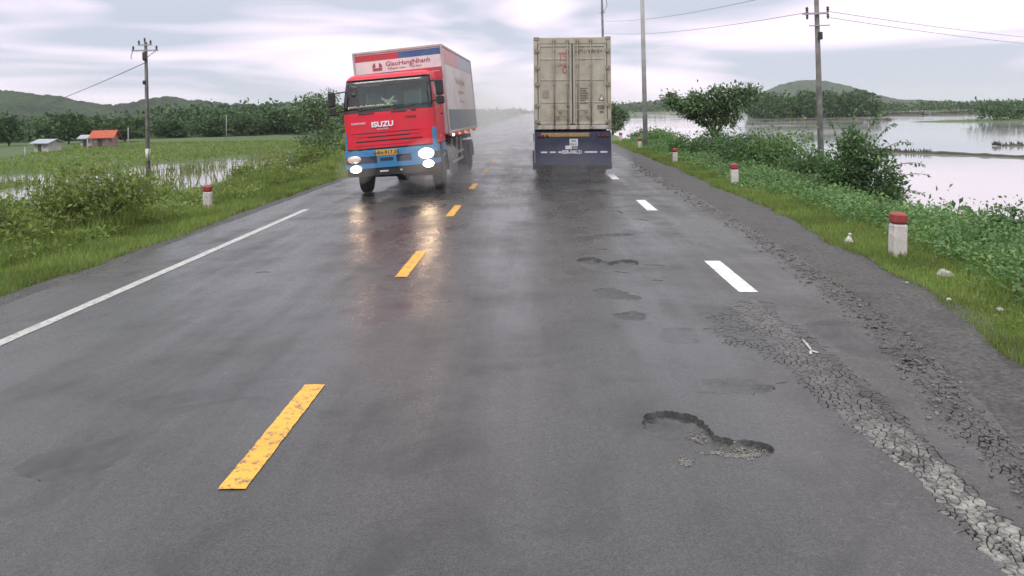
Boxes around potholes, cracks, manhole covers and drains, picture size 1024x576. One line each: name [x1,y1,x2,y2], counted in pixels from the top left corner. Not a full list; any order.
pothole [612,311,646,321]
pothole [641,410,775,469]
pothole [689,376,776,396]
pothole [577,257,639,269]
crack [702,229,1024,576]
pothole [591,288,642,301]
